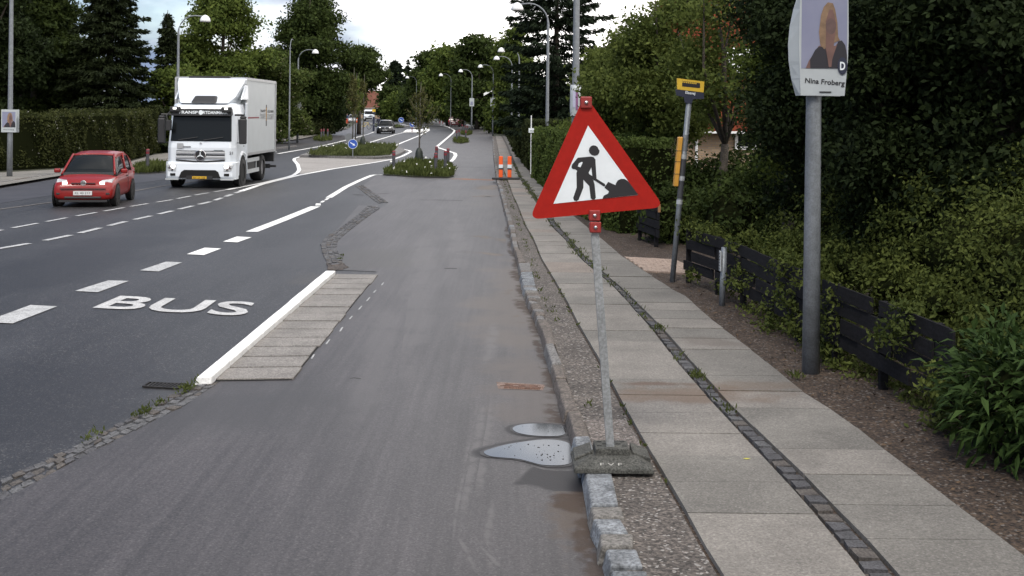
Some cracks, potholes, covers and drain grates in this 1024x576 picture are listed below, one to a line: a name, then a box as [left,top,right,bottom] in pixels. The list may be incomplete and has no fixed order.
drain grate [142,381,185,389]
